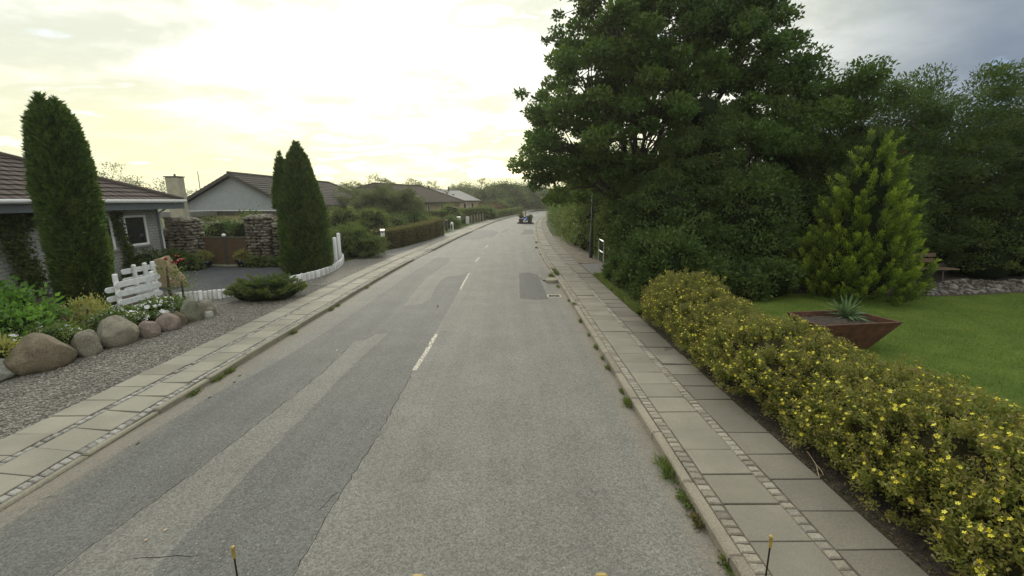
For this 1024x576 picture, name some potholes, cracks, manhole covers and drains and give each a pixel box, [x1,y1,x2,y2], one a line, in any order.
crack [53,334,375,576]
